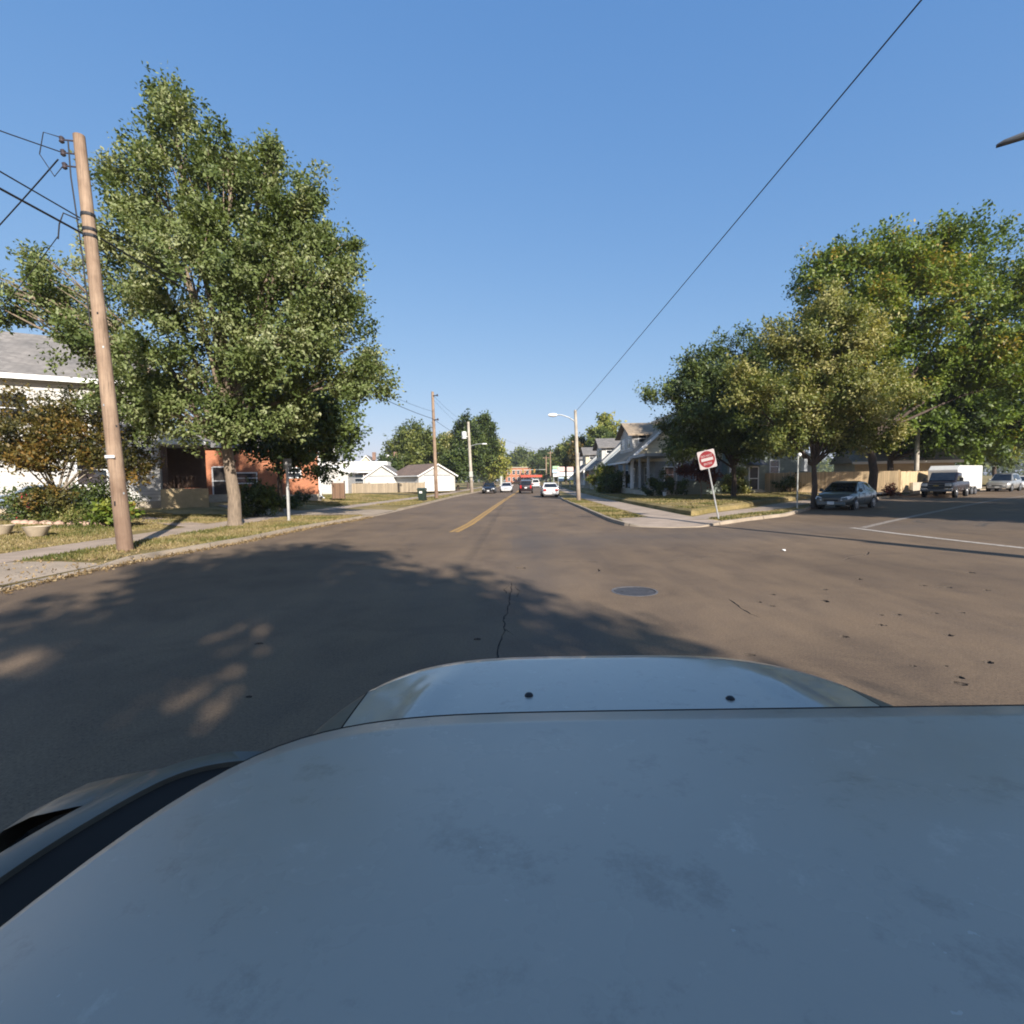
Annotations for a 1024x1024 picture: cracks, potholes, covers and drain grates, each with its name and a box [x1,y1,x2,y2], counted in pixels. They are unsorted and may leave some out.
crack [496,584,519,658]
manhole cover [611,586,658,596]
